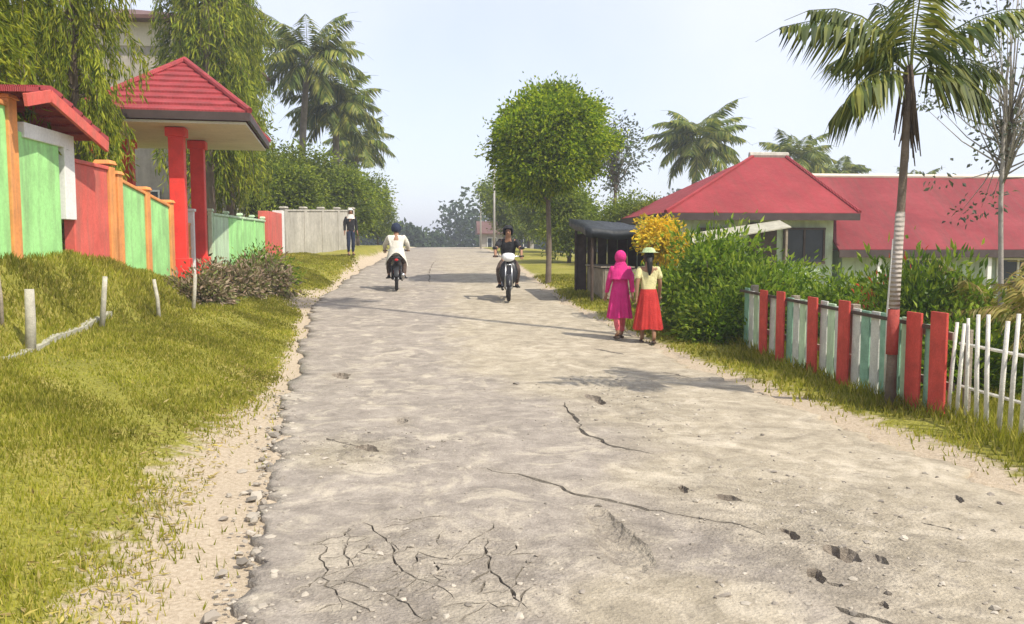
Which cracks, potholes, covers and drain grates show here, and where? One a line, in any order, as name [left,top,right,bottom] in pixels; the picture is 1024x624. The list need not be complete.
pothole [584,394,606,405]
crack [563,402,652,454]
crack [476,467,764,535]
pothole [779,528,800,540]
crack [835,606,894,624]
pothole [868,554,889,565]
crack [298,516,535,624]
pothole [585,507,657,574]
pothole [822,544,862,563]
pothole [807,568,827,584]
